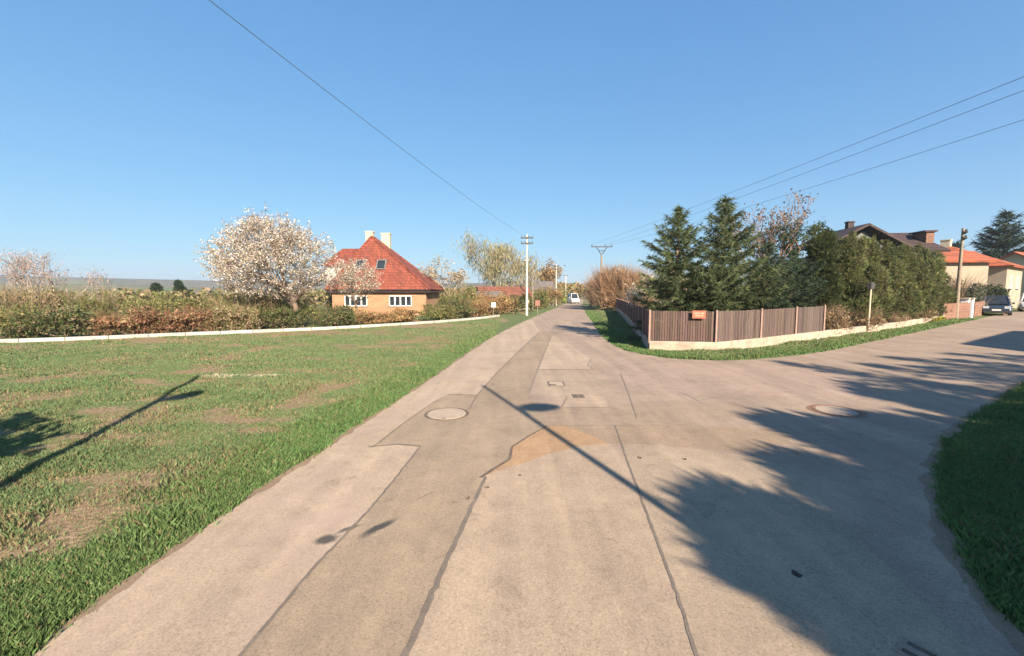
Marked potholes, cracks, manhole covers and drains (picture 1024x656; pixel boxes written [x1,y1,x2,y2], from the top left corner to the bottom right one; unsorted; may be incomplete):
drain grate [892,635,943,656]
manhole cover [806,404,867,418]
manhole cover [424,408,469,420]
